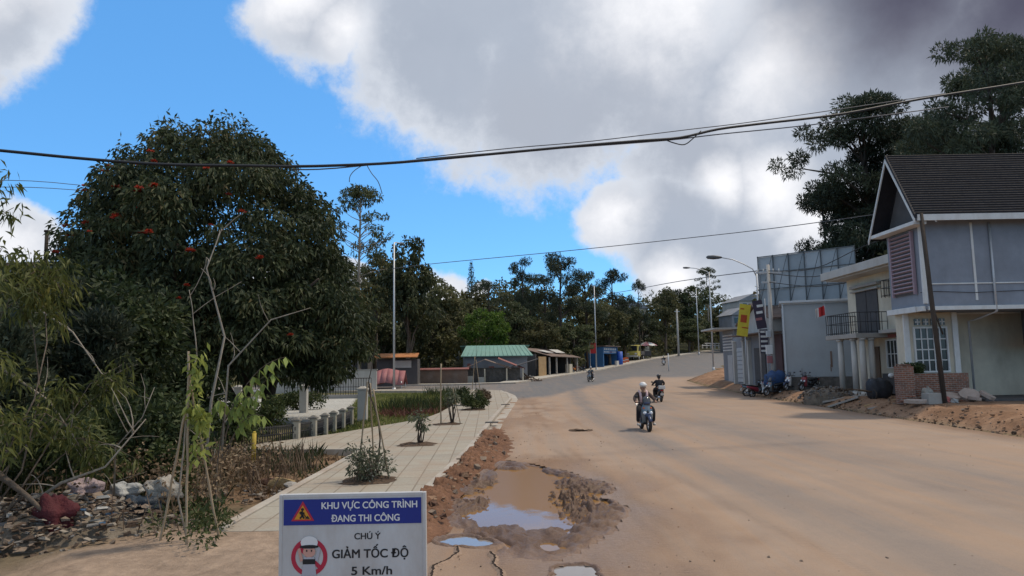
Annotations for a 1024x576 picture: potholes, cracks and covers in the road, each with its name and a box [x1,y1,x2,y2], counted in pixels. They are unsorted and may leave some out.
crack [486,551,507,576]
pothole [547,561,605,576]
pothole [432,533,507,552]
crack [427,545,463,576]
pothole [447,460,631,562]
